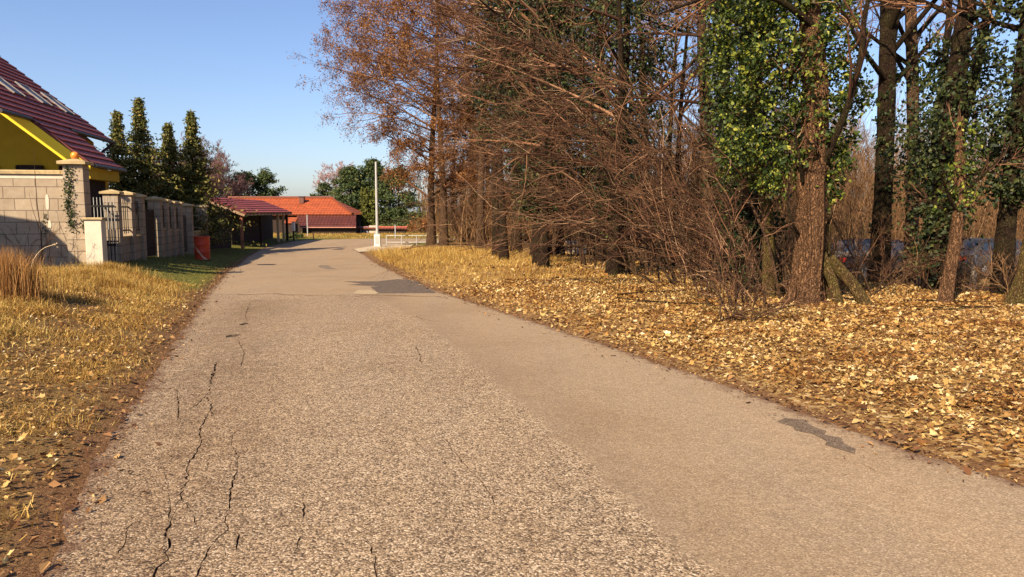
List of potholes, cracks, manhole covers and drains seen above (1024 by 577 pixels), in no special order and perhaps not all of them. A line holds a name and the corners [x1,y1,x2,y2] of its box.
crack [152,361,246,577]
crack [366,539,378,577]
